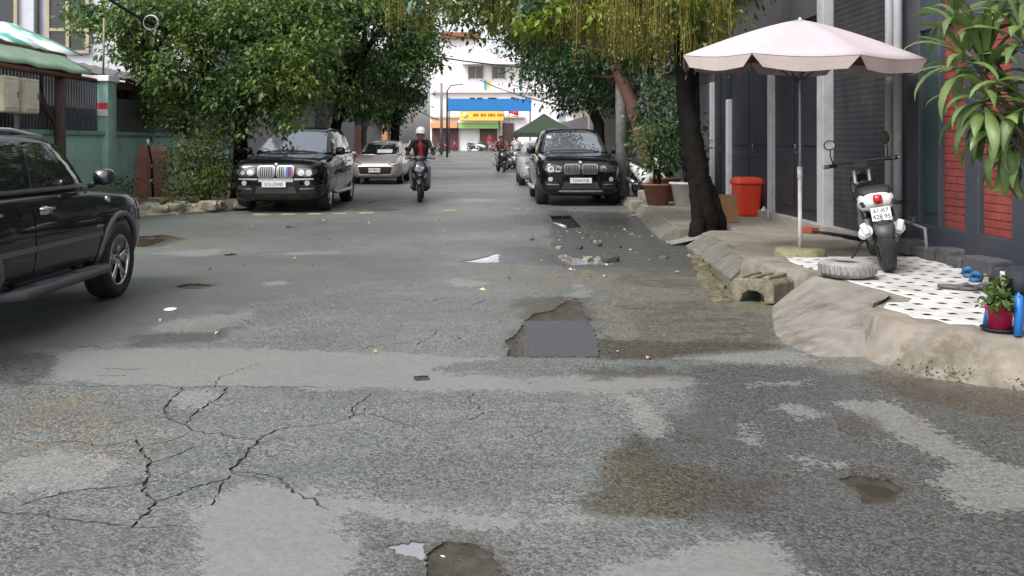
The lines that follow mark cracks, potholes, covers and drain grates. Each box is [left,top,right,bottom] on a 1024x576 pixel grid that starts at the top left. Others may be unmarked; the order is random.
pothole [424,541,502,576]
crack [0,364,484,528]
pothole [558,254,613,265]
pothole [136,235,174,247]
pothole [505,325,526,357]
pothole [524,301,593,321]
pothole [839,474,905,504]
